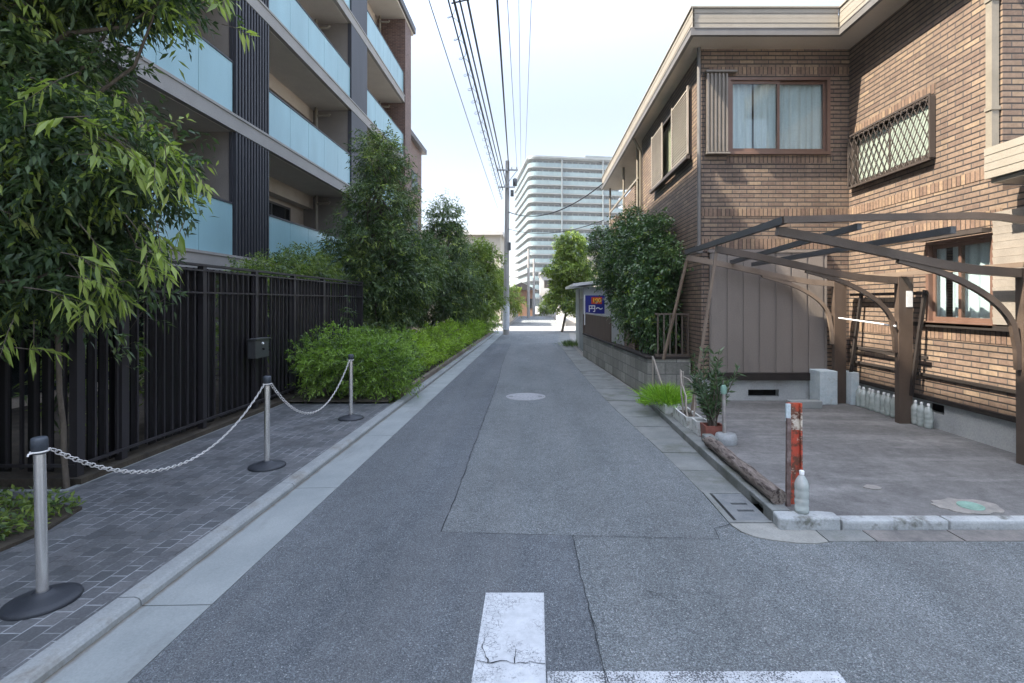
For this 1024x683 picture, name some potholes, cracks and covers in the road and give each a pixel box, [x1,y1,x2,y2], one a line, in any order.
utility cover [930,498,1005,515]
